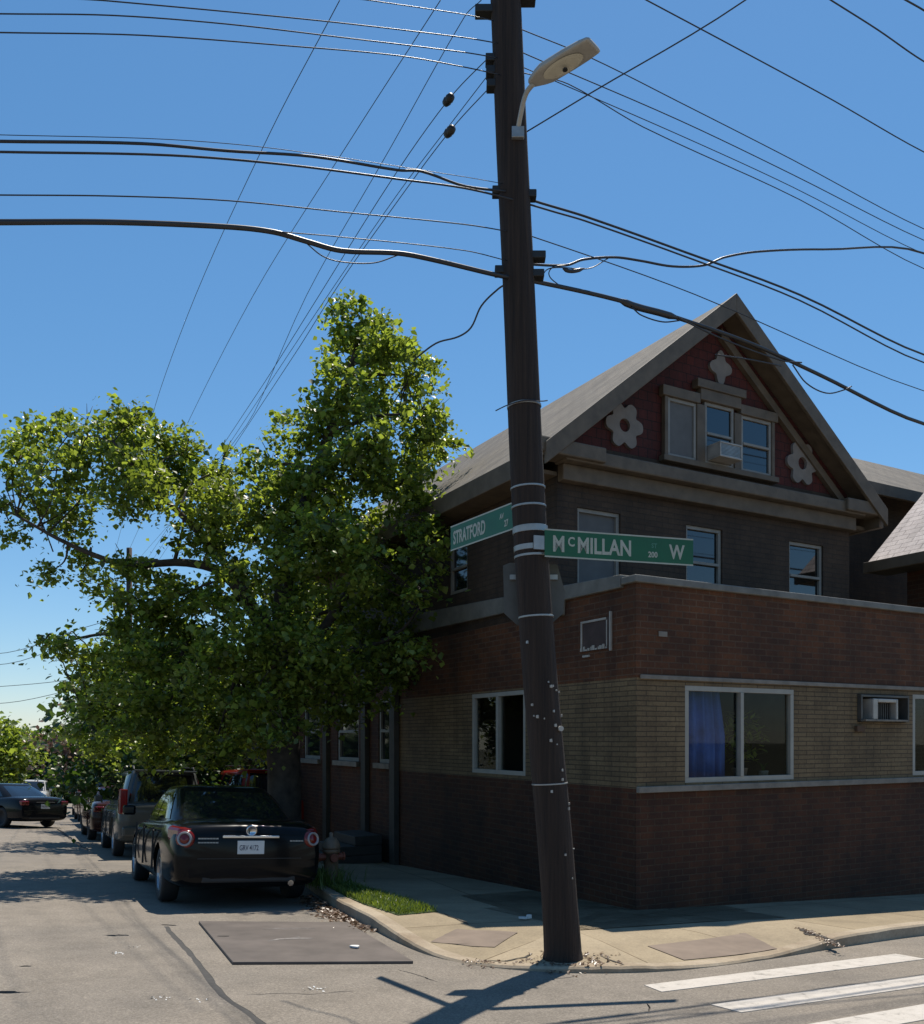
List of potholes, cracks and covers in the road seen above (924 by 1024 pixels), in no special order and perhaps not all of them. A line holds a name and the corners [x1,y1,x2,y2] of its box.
crack [165,927,266,1024]
